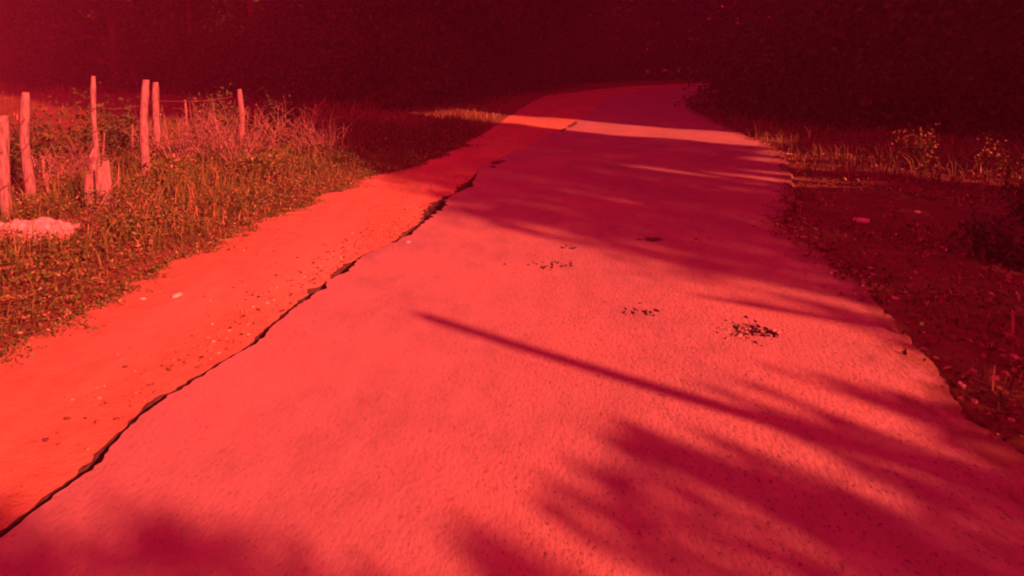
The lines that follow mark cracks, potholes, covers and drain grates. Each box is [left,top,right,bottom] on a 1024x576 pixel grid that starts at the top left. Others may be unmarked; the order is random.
crack [0,170,479,538]
pothole [707,316,786,344]
